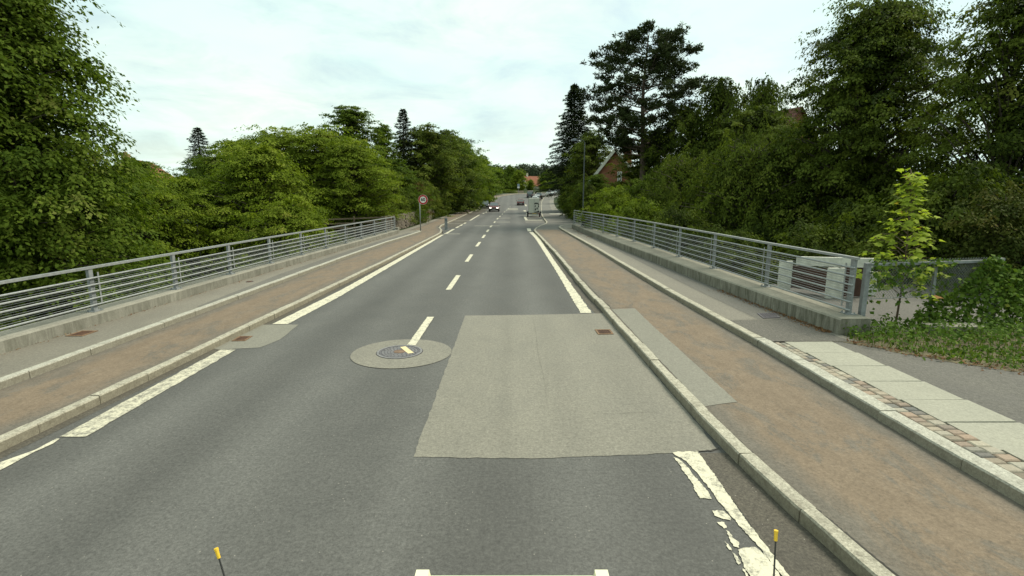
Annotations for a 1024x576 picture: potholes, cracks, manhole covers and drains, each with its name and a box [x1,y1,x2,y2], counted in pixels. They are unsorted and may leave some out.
manhole cover [376,345,423,359]
